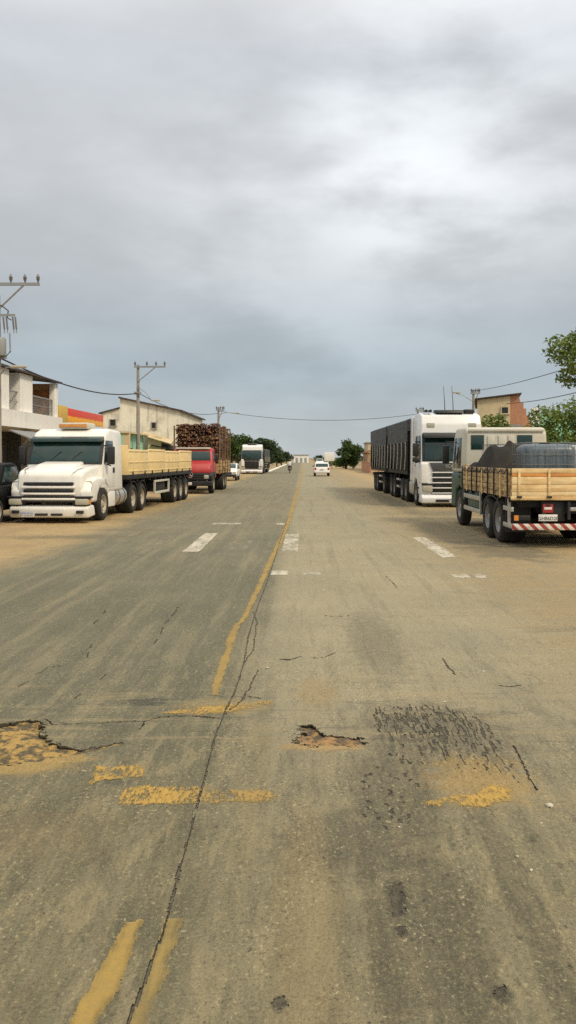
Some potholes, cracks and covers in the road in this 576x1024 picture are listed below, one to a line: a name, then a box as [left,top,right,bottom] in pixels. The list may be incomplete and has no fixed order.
pothole [271,995,289,1010]
pothole [492,984,507,998]
pothole [389,882,407,917]
crack [44,517,288,1024]
pothole [0,719,124,766]
pothole [291,724,369,748]
crack [361,705,538,830]
